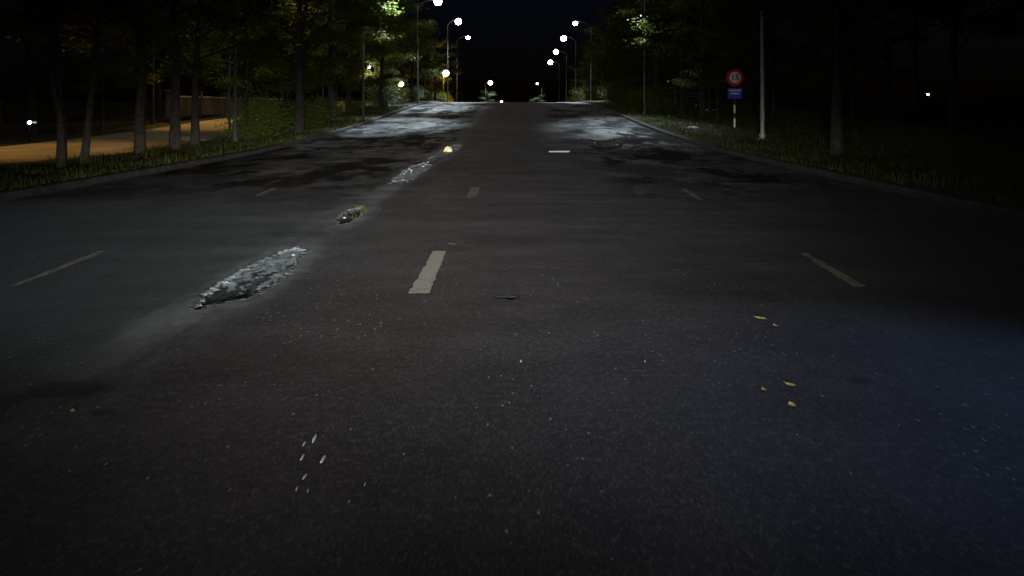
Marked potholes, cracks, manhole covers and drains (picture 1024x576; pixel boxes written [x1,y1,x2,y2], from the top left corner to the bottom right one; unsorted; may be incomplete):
pothole [334,205,368,225]
pothole [577,138,629,150]
pothole [186,246,311,311]
pothole [386,162,433,184]
pothole [422,145,464,166]
